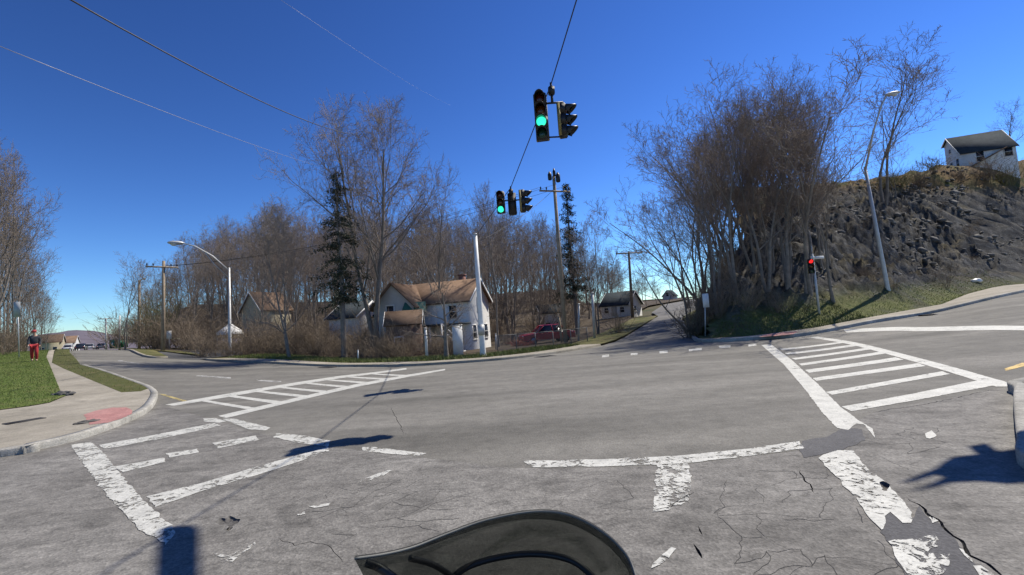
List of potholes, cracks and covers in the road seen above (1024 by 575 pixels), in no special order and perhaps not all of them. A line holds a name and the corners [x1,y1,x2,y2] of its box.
pothole [216,516,240,531]
crack [714,469,899,575]
crack [908,499,1002,575]
crack [322,478,484,535]
